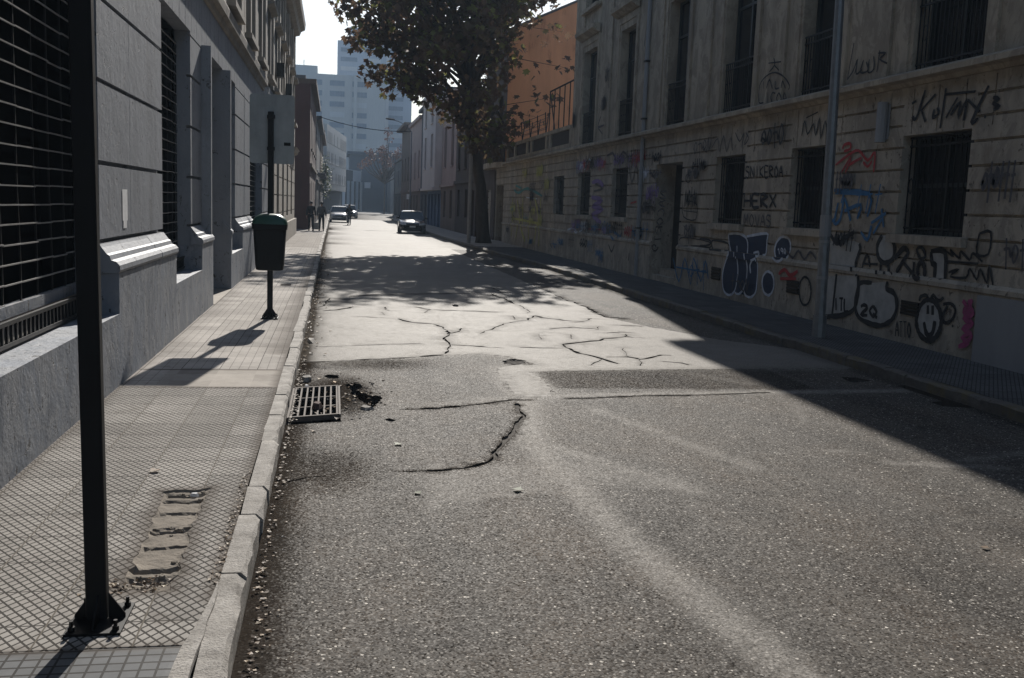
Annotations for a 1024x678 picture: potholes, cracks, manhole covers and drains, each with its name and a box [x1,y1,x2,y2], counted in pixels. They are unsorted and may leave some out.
drain grate [285,385,342,425]
crack [403,403,526,472]
crack [311,288,688,366]
pothole [345,383,382,407]
